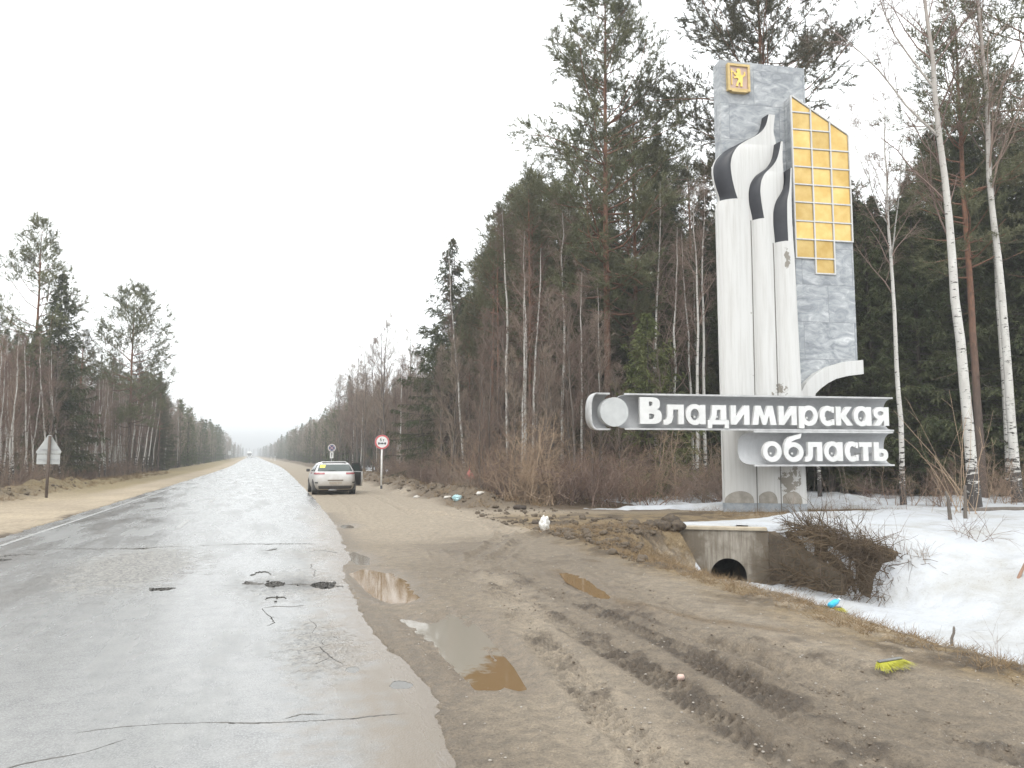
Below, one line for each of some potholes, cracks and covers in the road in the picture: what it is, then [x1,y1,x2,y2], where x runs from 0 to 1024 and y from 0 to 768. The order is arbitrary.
pothole [310,581,336,589]
crack [262,605,342,664]
crack [9,713,397,768]
pothole [389,681,413,689]
